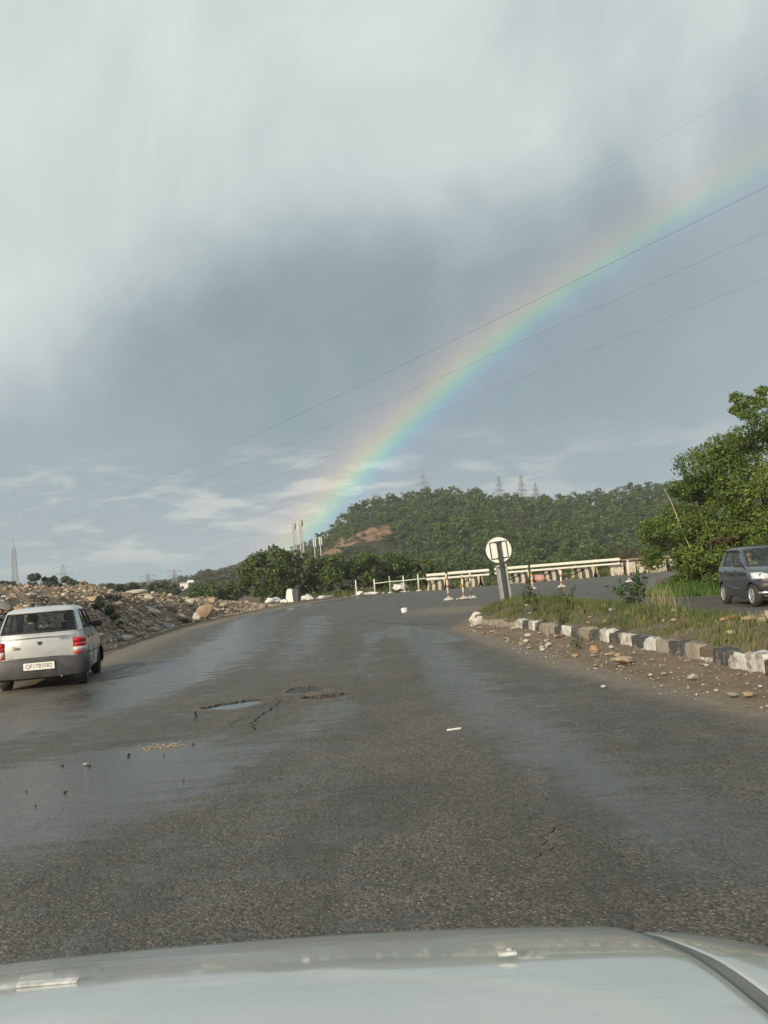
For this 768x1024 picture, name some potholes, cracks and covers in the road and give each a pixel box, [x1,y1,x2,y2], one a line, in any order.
pothole [198,698,270,710]
pothole [285,685,325,693]
crack [529,813,568,858]
crack [229,701,282,730]
